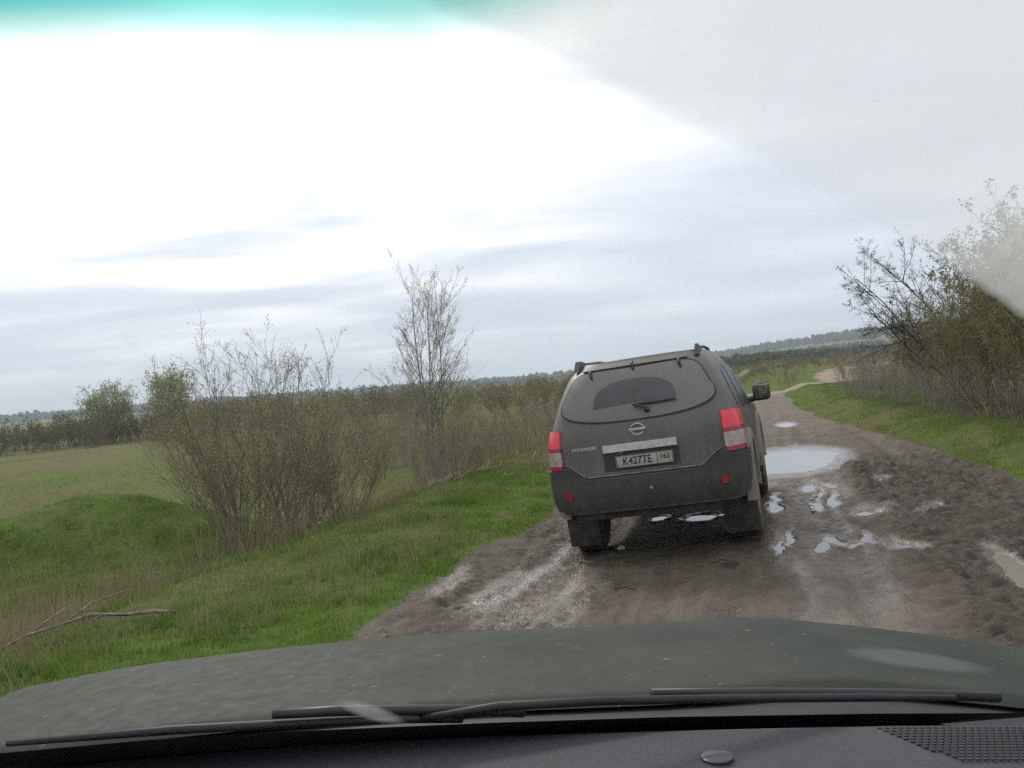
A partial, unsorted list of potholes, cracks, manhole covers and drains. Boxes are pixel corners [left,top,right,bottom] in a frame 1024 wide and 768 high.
pothole [988,544,1024,588]
pothole [765,493,787,513]
pothole [814,531,879,553]
pothole [882,536,925,549]
pothole [801,481,844,511]
pothole [764,447,845,476]
pothole [772,530,799,555]
